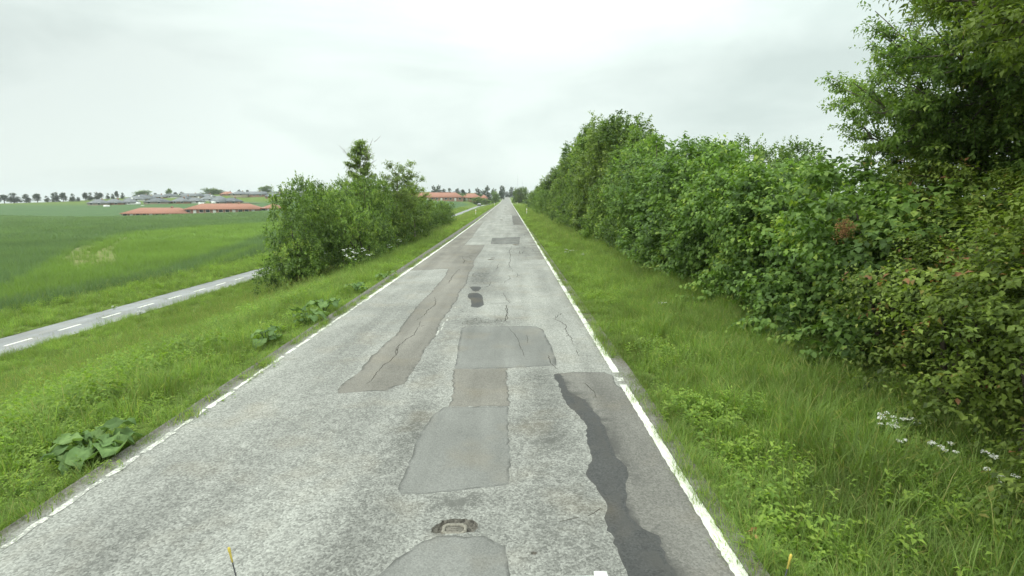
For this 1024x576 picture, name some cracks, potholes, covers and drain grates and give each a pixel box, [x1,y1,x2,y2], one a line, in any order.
crack [373,224,534,378]
manhole cover [441,523,467,534]
